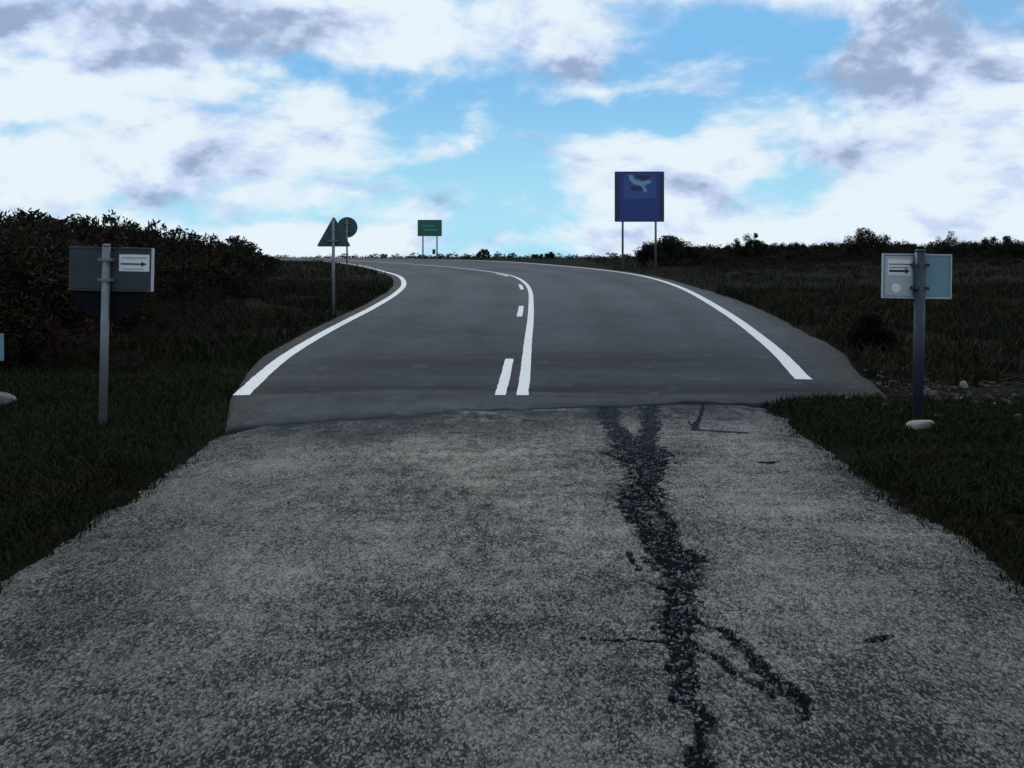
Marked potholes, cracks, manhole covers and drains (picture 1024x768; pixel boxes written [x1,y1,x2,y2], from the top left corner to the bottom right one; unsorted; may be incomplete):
crack [580,404,815,768]
pothole [864,635,894,643]
